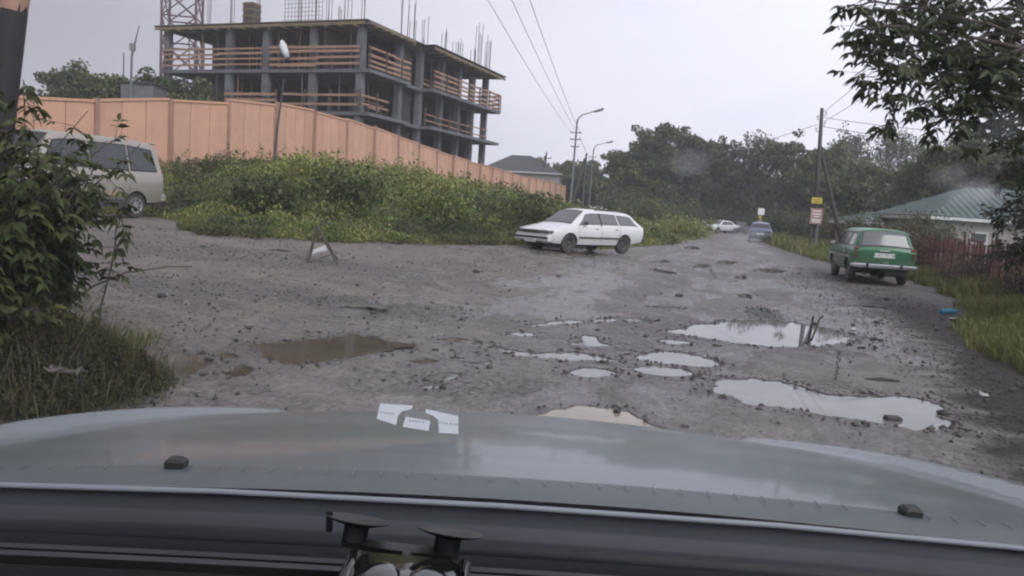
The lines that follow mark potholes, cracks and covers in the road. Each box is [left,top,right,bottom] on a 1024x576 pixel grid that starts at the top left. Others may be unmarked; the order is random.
pothole [517,318,597,329]
pothole [223,331,435,369]
pothole [642,267,683,275]
pothole [551,364,637,382]
pothole [617,363,710,381]
pothole [613,348,736,370]
pothole [498,400,701,434]
pothole [652,318,864,350]
pothole [493,330,548,339]
pothole [459,340,636,365]
pothole [146,350,232,381]
